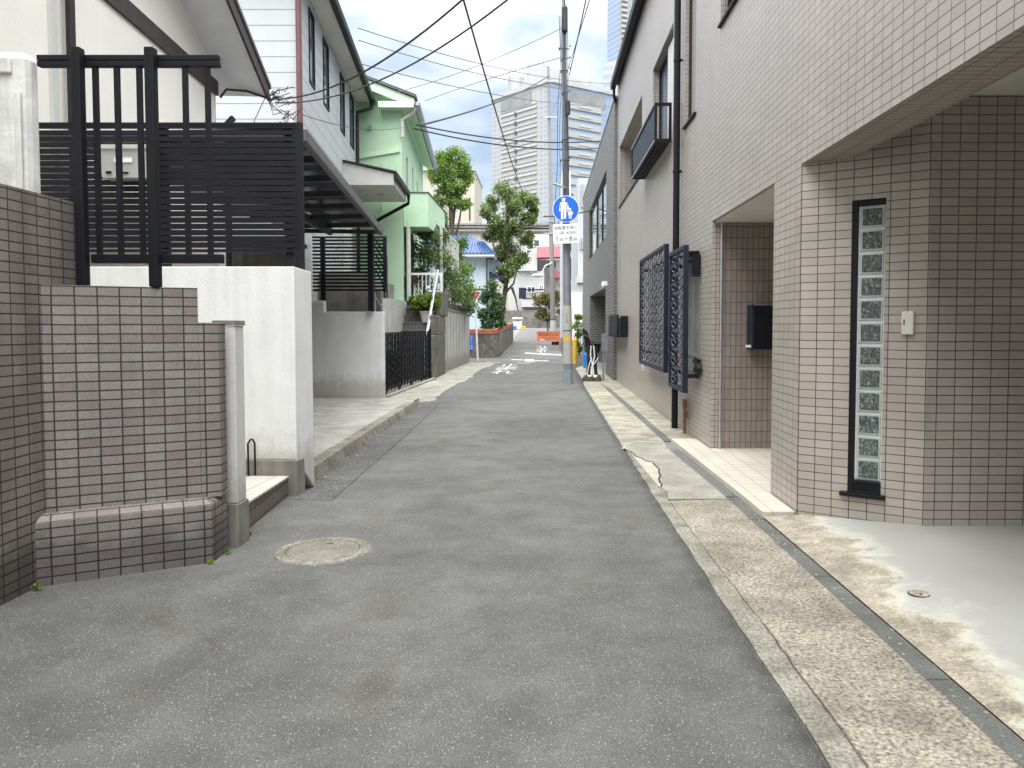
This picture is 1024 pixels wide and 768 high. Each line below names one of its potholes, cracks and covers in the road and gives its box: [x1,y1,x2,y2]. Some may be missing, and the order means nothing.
manhole cover [272,537,372,566]
